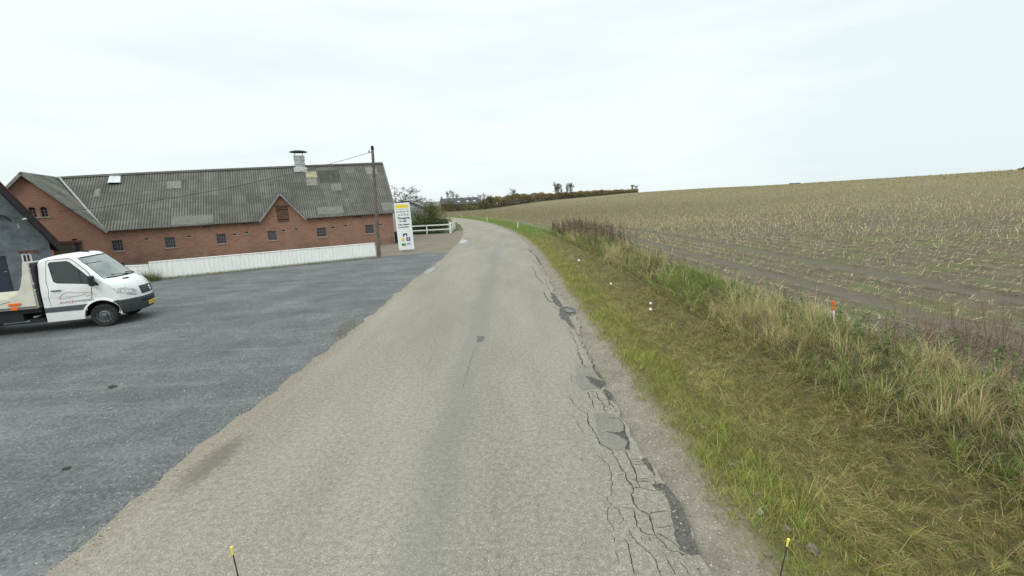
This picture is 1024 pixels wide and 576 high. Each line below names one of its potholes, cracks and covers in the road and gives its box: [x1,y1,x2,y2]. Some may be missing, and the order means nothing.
pothole [559,307,576,330]
crack [568,328,688,574]
